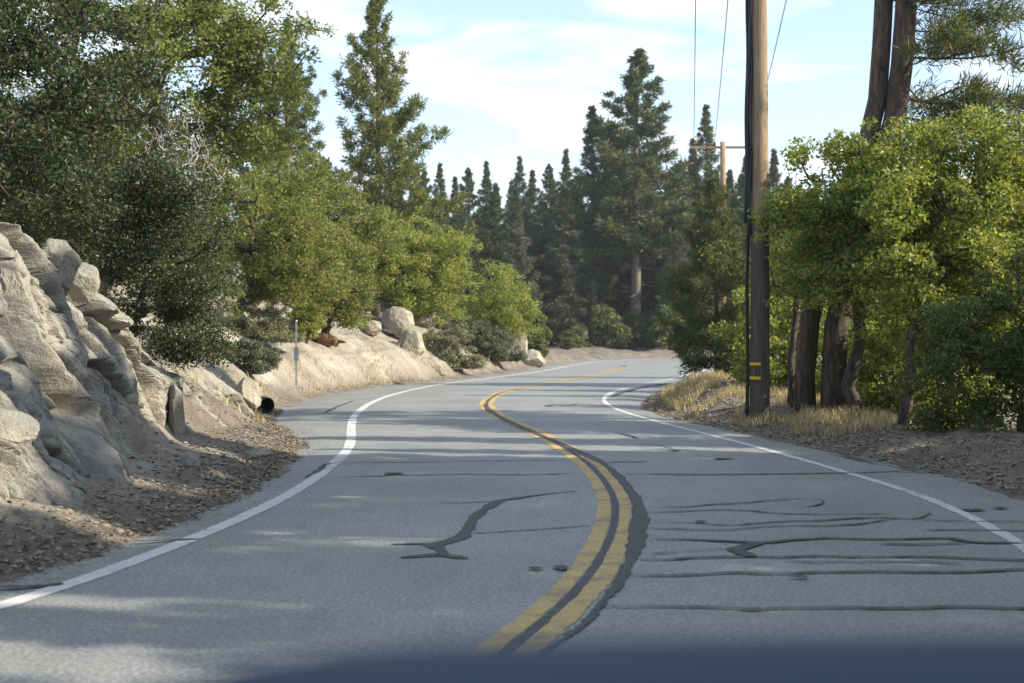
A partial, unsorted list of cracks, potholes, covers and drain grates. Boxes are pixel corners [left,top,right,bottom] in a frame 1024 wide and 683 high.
crack [305,460,566,478]
crack [629,498,1024,576]
